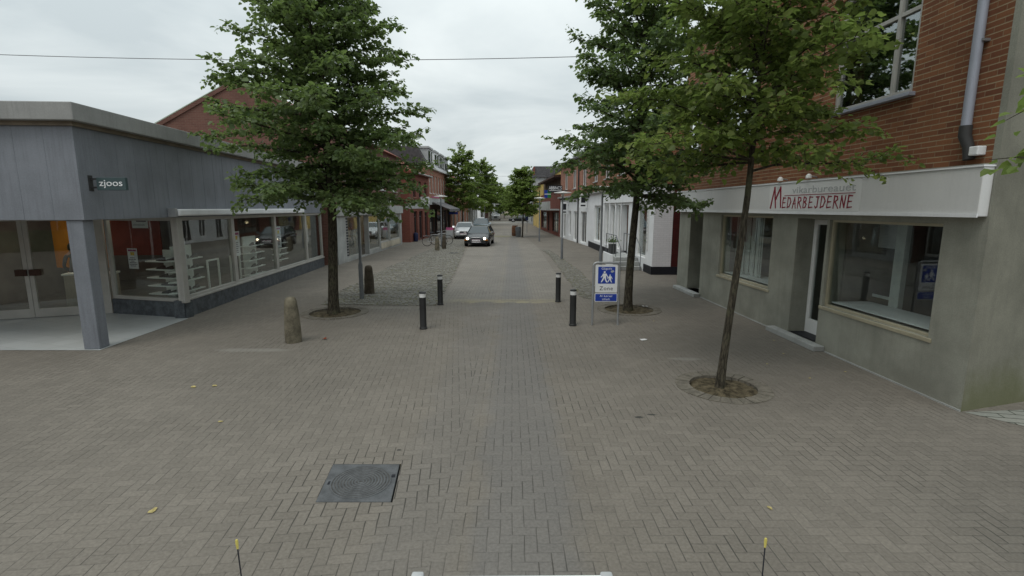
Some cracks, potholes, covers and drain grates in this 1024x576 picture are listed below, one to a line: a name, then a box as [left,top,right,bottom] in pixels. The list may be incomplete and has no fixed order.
manhole cover [316,464,401,502]
